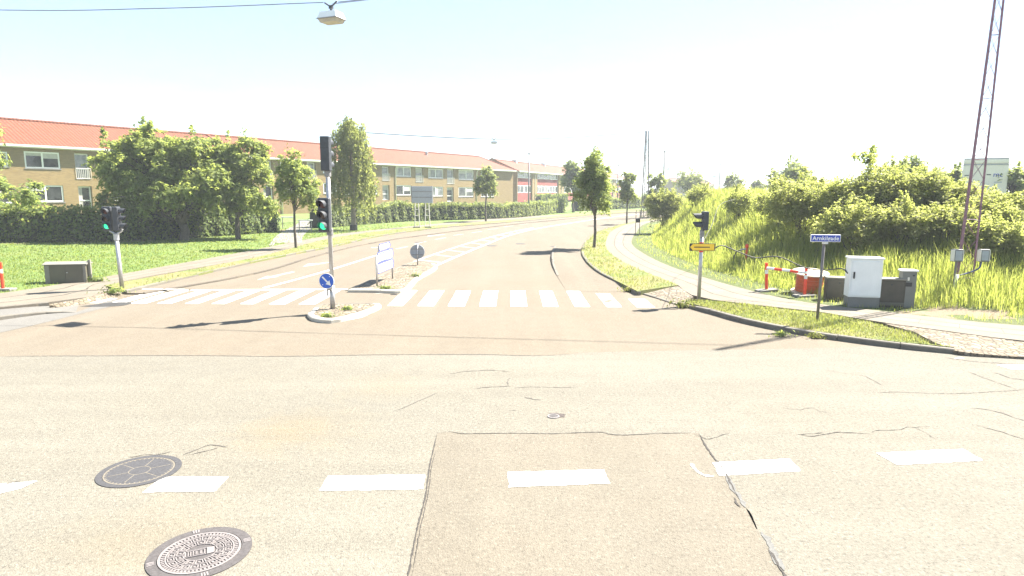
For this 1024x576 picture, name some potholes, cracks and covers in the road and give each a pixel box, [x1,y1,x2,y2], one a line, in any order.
crack [829,370,1024,439]
manhole cover [95,455,182,488]
manhole cover [145,527,252,576]
crack [800,426,937,440]
crack [133,444,227,457]
